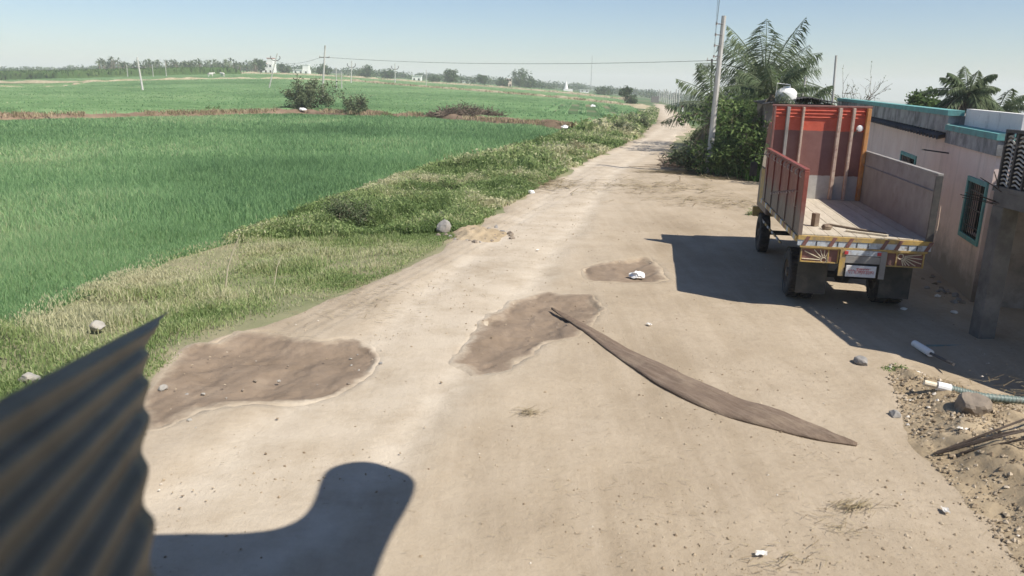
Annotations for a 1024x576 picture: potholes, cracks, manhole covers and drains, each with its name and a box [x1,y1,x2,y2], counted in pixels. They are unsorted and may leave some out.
pothole [144,331,380,432]
pothole [448,291,606,377]
pothole [581,257,669,283]
